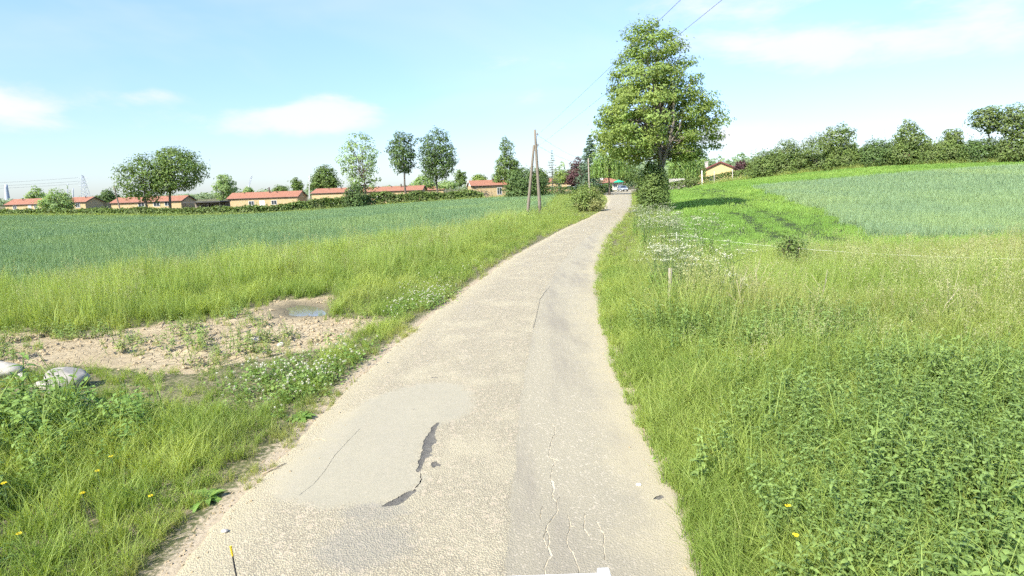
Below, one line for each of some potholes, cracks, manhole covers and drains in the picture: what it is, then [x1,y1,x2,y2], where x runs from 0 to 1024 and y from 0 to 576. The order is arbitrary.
pothole [382,489,416,507]
crack [540,423,606,575]
pothole [416,422,439,472]
